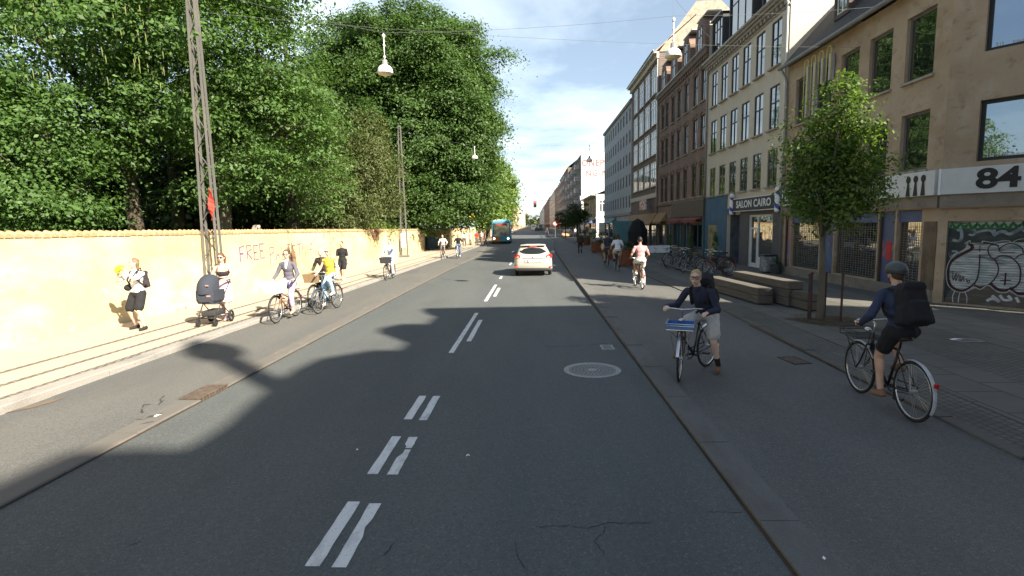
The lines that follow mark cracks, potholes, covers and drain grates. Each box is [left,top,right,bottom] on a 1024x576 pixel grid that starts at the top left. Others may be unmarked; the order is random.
drain grate [179,384,228,401]
manhole cover [564,363,621,378]
crack [135,395,165,424]
crack [537,522,653,555]
